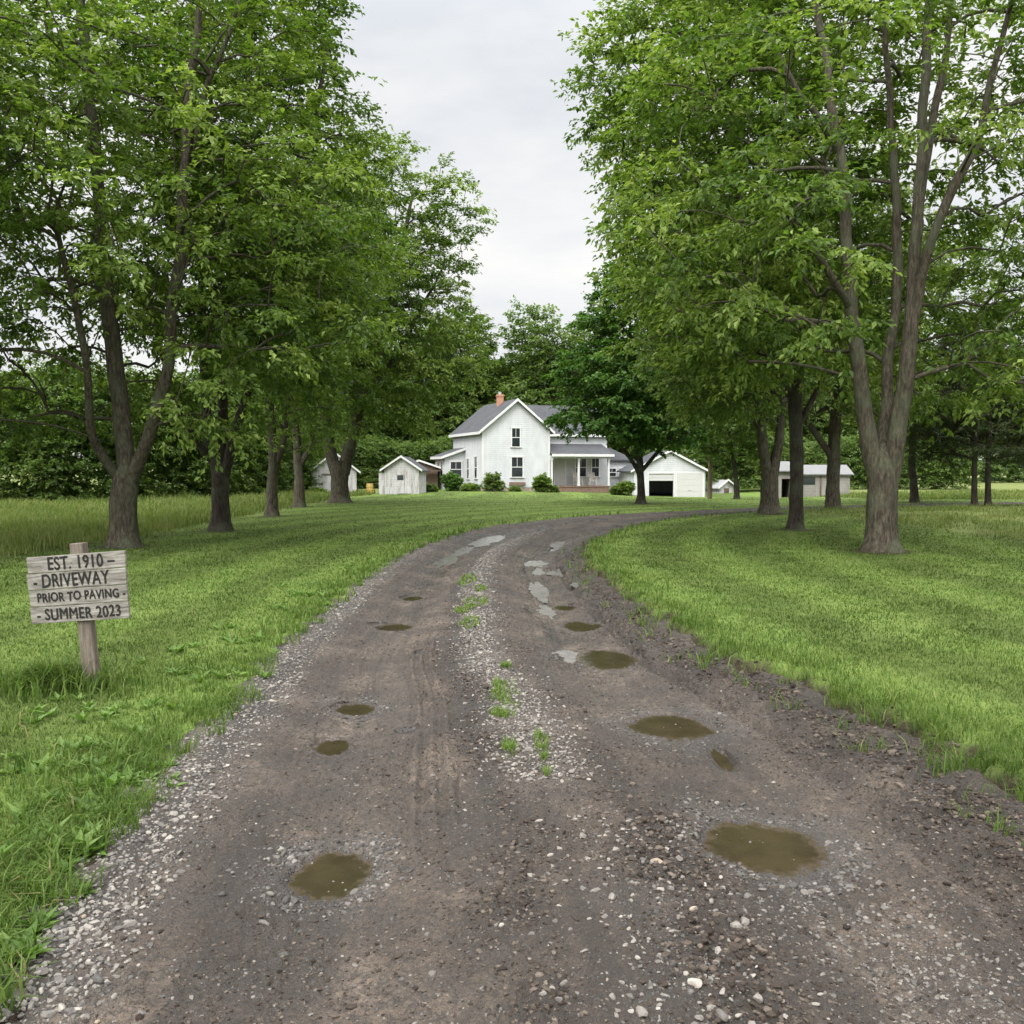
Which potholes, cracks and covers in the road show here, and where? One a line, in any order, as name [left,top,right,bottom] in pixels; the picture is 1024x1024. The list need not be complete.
pothole [684,813,845,887]
pothole [397,594,427,602]
pothole [613,710,731,746]
pothole [364,621,419,634]
pothole [556,617,609,634]
pothole [274,844,383,908]
pothole [573,643,650,674]
pothole [552,602,584,612]
pothole [326,699,383,719]
pothole [706,742,739,775]
pothole [307,734,357,759]
